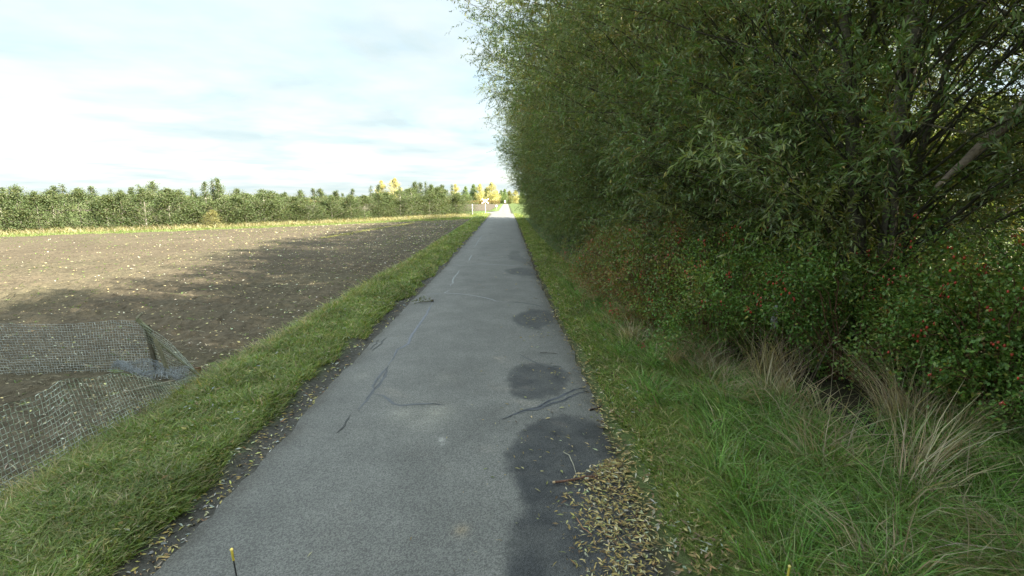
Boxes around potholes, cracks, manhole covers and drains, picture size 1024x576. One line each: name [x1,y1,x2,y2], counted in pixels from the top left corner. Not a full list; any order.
crack [501,354,592,420]
crack [436,236,544,307]
